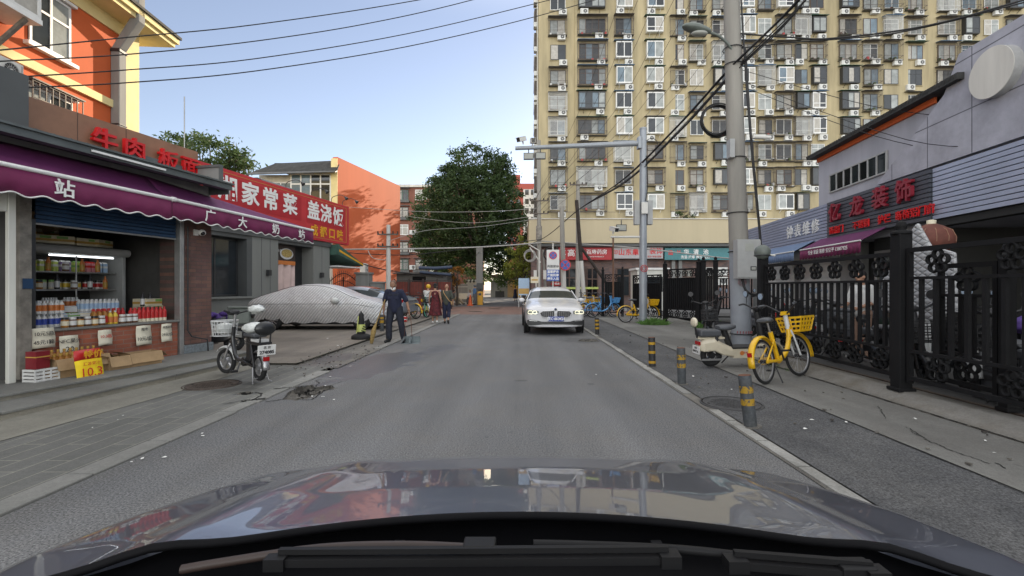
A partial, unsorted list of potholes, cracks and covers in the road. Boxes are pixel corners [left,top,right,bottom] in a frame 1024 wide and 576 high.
pothole [281,384,337,401]
manhole cover [700,396,765,412]
manhole cover [181,379,242,391]
